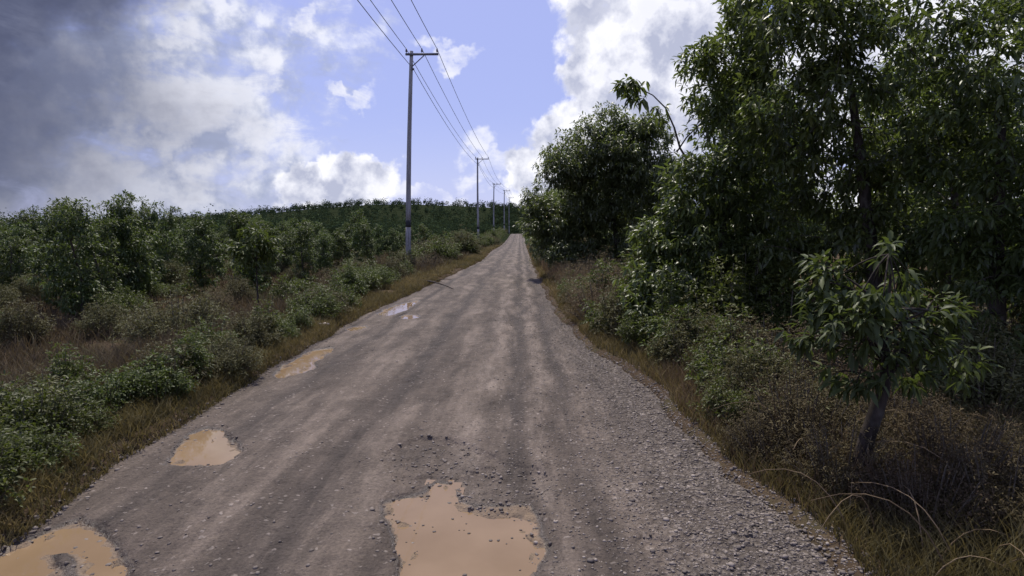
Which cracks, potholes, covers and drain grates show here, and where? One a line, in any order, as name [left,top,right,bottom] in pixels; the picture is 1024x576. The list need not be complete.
pothole [269,346,336,378]
pothole [157,425,251,467]
pothole [373,478,560,576]
pothole [0,514,143,576]
pothole [375,299,421,316]
